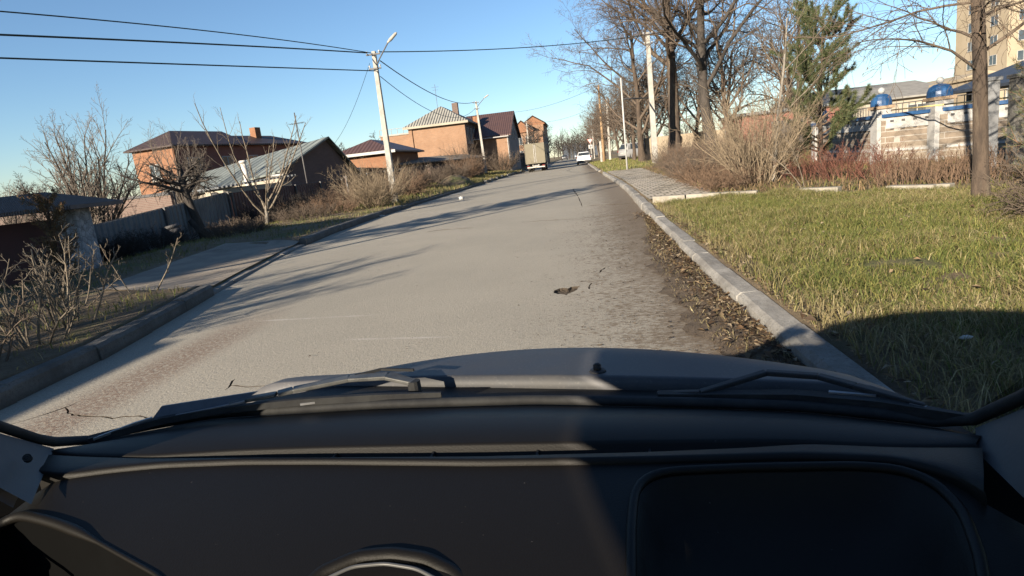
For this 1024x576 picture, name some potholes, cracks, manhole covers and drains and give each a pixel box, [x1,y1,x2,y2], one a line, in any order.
pothole [554,286,580,295]
crack [13,403,148,424]
